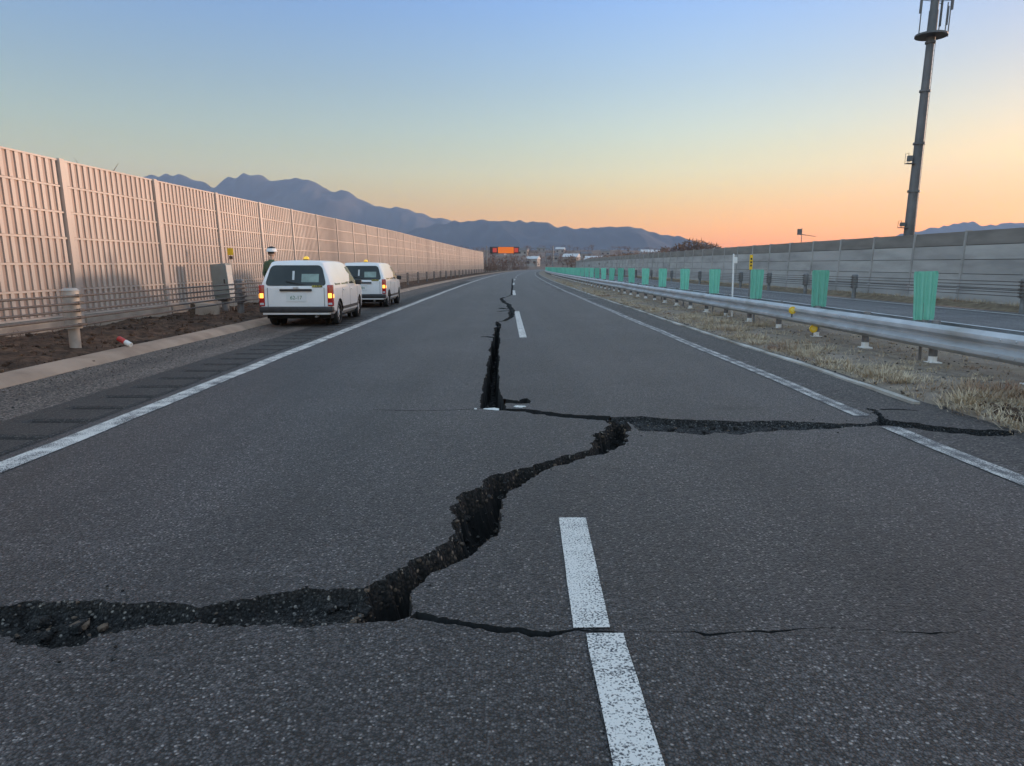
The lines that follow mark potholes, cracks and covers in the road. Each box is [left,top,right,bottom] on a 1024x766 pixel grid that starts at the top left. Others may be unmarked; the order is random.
crack [0,279,1014,663]
